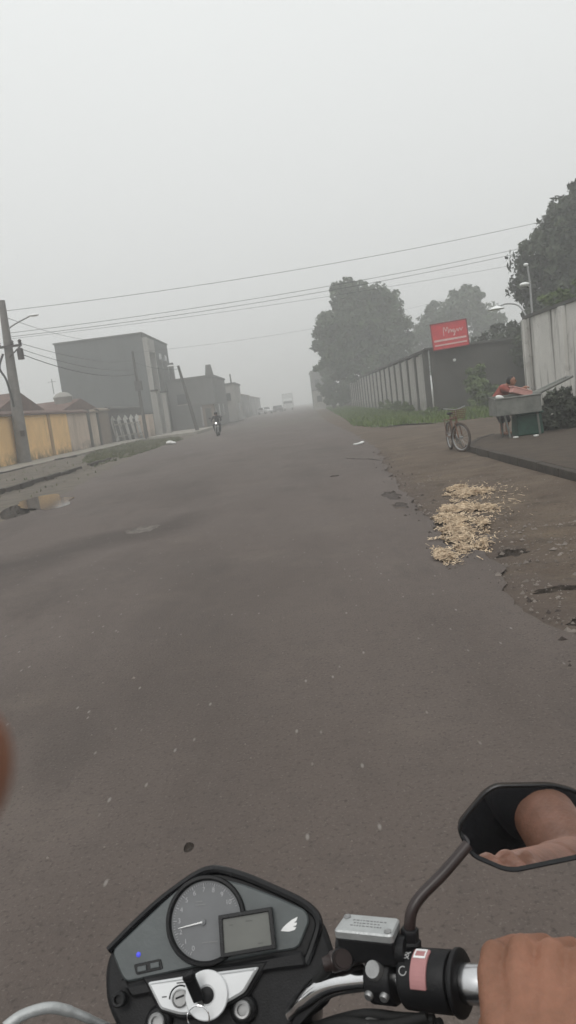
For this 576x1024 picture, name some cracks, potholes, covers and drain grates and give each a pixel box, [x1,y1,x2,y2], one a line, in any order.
pothole [0,505,33,520]
pothole [381,491,402,500]
pothole [493,548,530,559]
